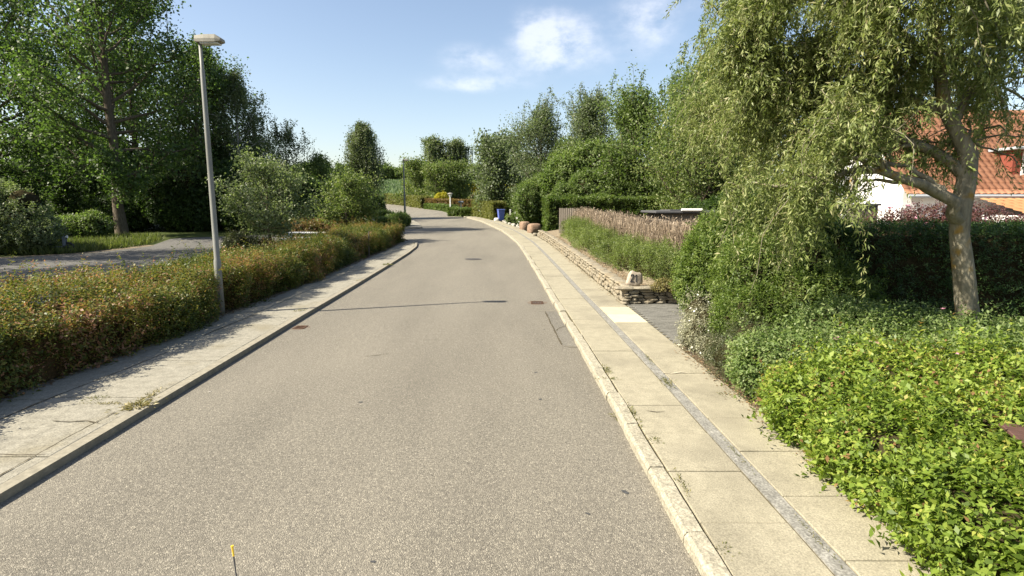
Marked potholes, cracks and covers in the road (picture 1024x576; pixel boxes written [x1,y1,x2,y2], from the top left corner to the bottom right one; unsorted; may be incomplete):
crack [539,310,570,347]
